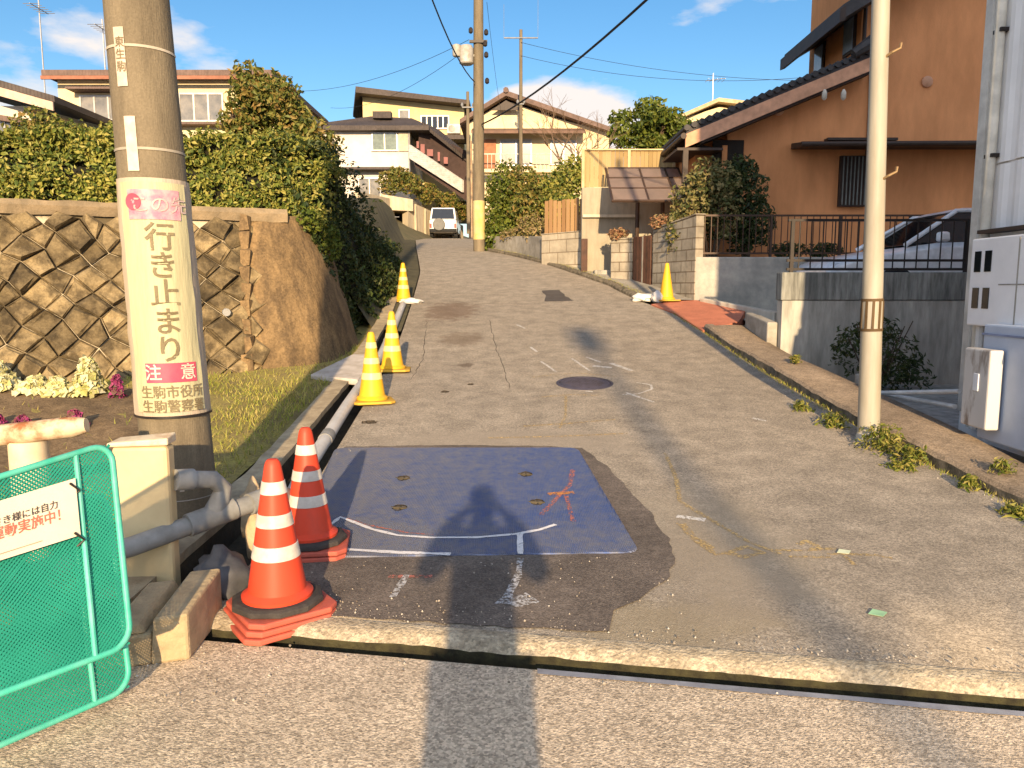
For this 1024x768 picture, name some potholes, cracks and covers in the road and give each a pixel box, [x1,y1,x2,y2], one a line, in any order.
manhole cover [556,376,614,390]
